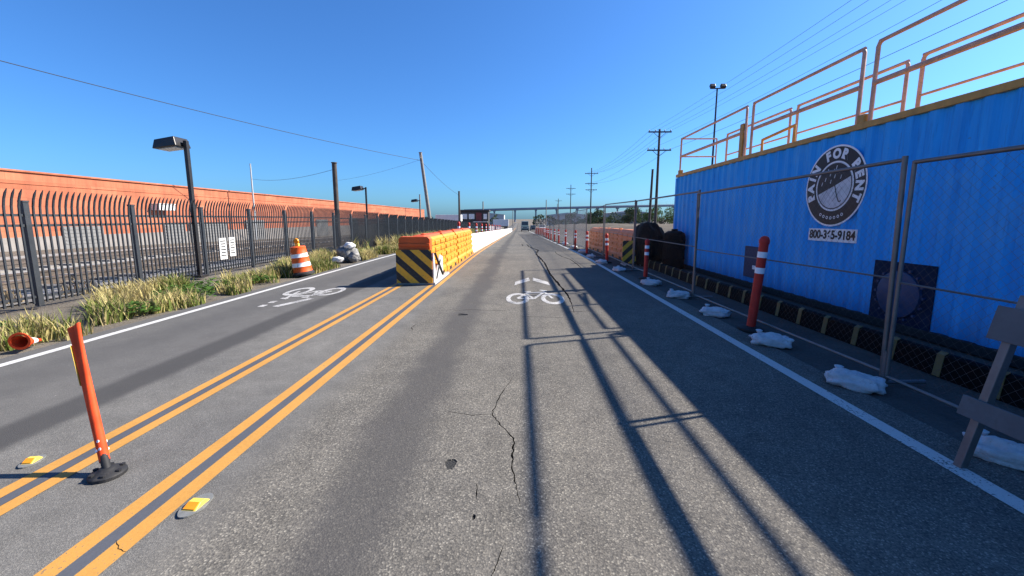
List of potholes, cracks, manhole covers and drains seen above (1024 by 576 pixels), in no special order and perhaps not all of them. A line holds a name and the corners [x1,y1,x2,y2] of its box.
crack [455,374,521,506]
crack [522,245,581,318]
